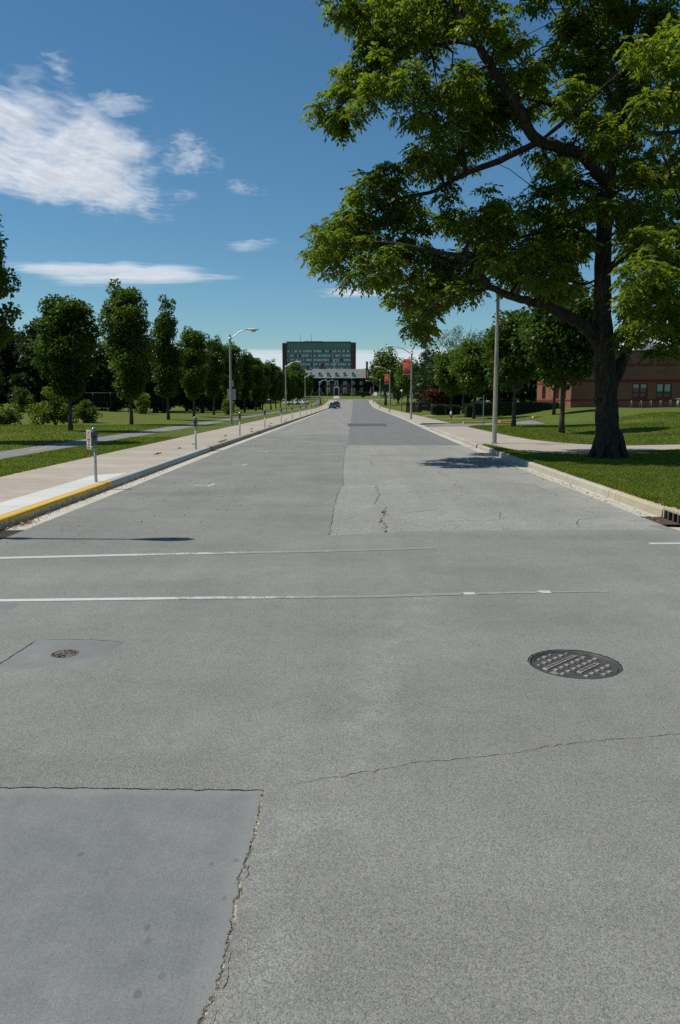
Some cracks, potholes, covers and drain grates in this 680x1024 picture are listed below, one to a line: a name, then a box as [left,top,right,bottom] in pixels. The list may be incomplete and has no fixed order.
drain grate [643,507,680,527]
utility cover [51,650,79,658]
manhole cover [528,650,623,680]
crack [367,455,508,532]
drain grate [0,530,24,540]
crack [277,734,668,787]
crack [197,791,265,1024]
